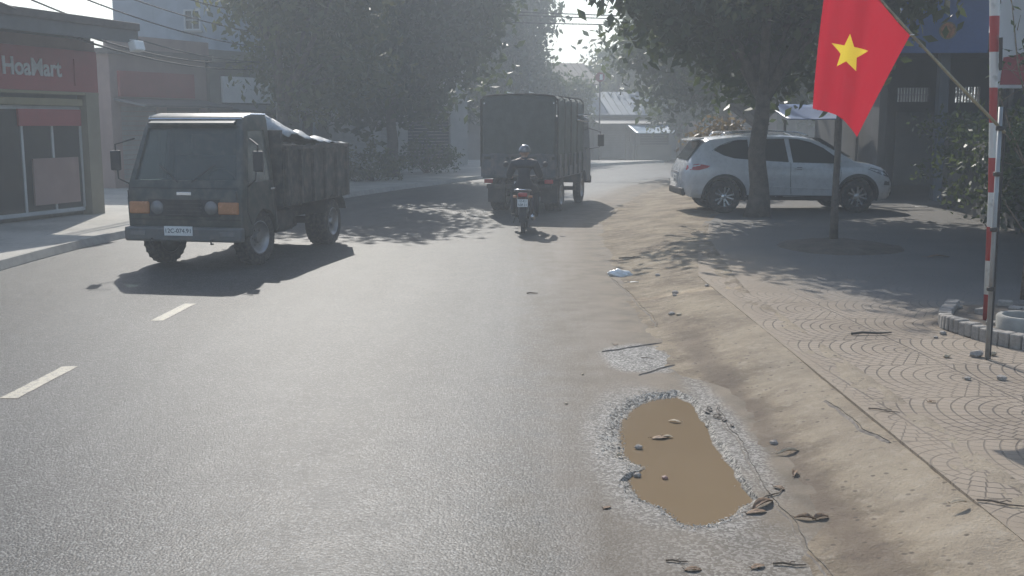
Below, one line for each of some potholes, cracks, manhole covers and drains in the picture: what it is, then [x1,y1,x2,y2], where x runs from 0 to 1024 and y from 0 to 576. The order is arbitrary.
crack [716,404,833,576]
crack [602,278,675,375]
crack [823,400,891,443]
pothole [588,389,758,532]
